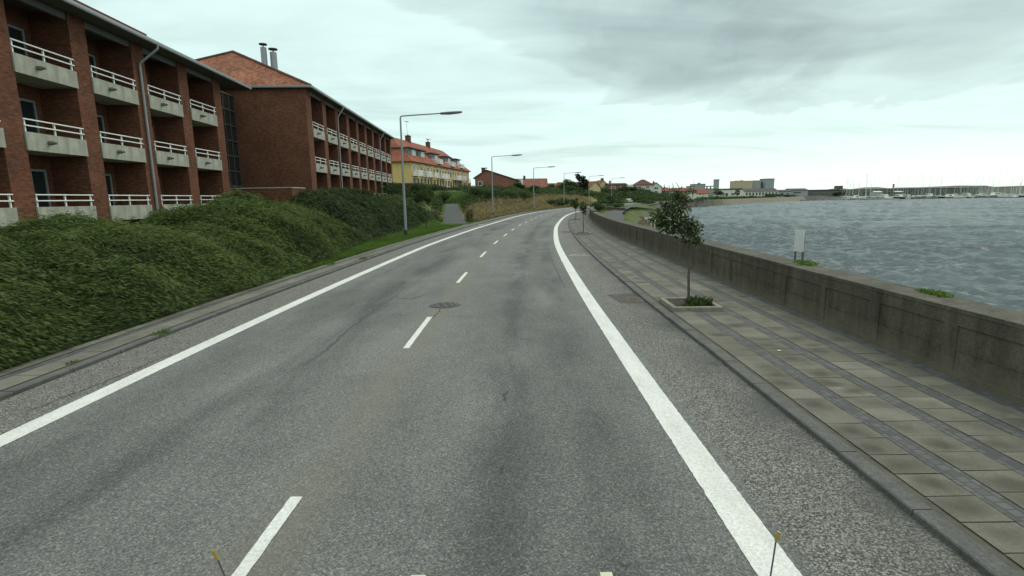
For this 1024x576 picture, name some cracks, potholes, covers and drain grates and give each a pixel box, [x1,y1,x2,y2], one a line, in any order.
crack [304,294,440,365]
